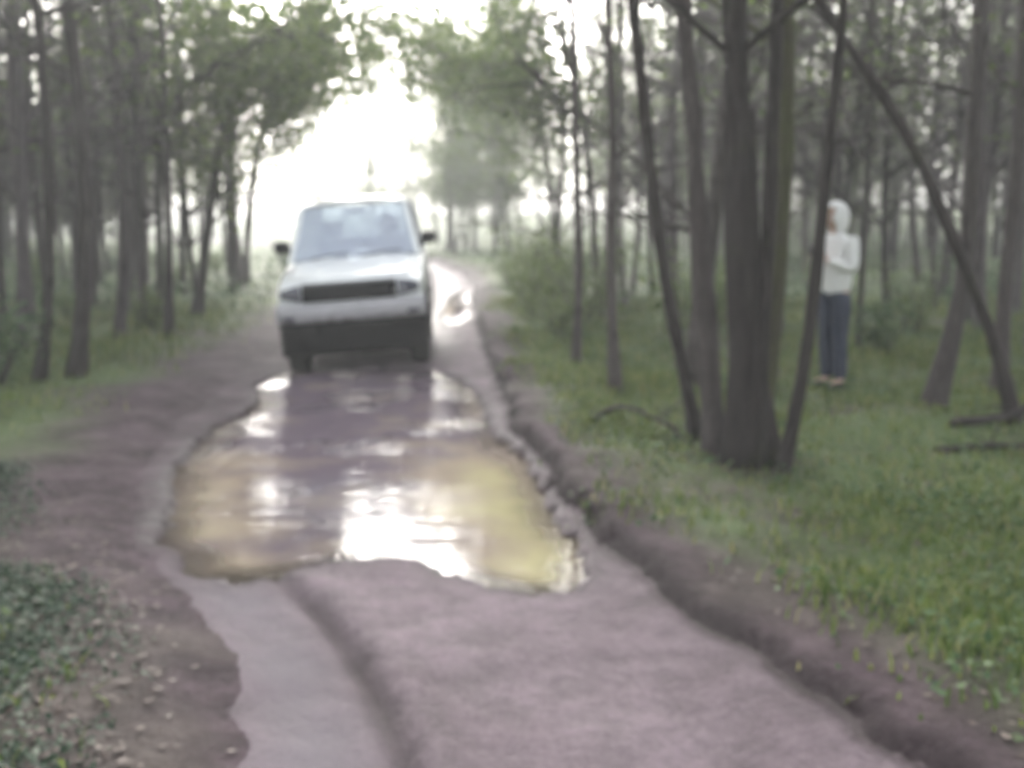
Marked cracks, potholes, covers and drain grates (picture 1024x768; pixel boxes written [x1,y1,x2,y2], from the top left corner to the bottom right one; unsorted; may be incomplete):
pothole [143,366,602,596]
pothole [437,291,478,326]
